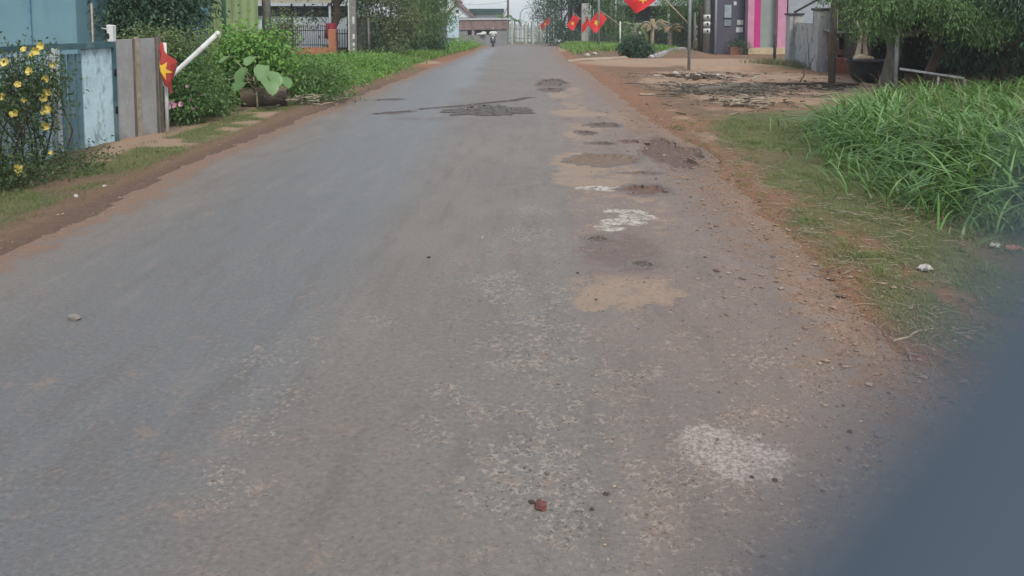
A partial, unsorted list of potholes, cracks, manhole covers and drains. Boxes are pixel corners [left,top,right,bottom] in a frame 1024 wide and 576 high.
pothole [534,78,571,87]
pothole [637,135,711,173]
pothole [622,259,659,269]
pothole [610,183,676,197]
pothole [560,152,646,168]
pothole [583,234,614,244]
